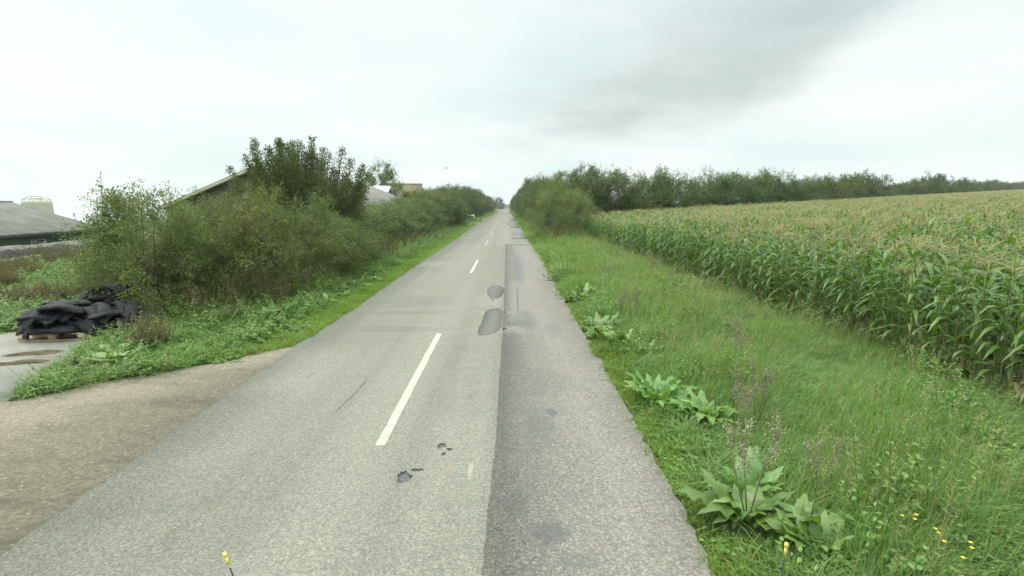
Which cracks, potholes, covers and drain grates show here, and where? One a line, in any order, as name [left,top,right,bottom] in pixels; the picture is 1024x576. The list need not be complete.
pothole [396,470,413,484]
